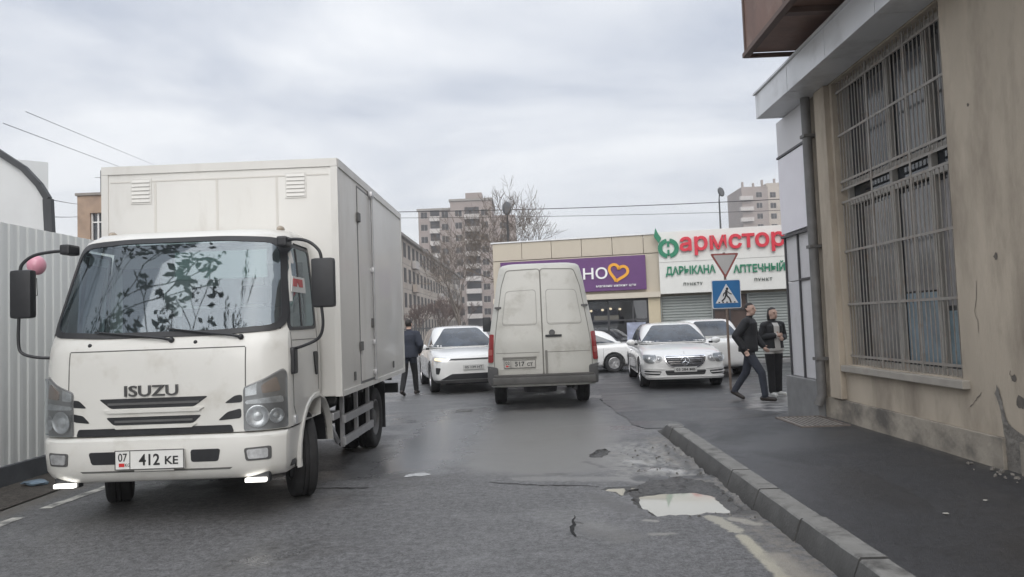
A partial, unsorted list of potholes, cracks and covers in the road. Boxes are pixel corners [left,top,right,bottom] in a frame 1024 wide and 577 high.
drain grate [775,415,851,428]
pothole [624,476,743,517]
crack [569,515,584,536]
pothole [589,449,610,458]
